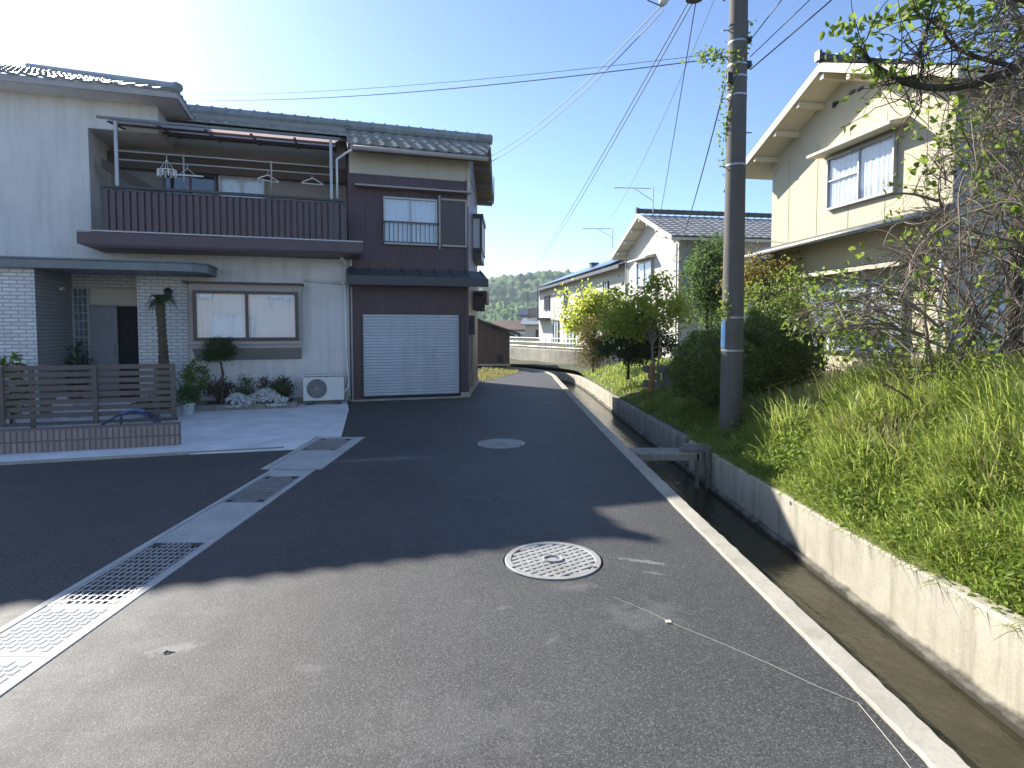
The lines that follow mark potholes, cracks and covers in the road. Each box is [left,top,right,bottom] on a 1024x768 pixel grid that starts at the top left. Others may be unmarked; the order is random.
drain grate [220,476,301,503]
manhole cover [505,542,602,581]
drain grate [48,542,207,606]
drain grate [300,439,352,451]
manhole cover [478,439,525,449]
